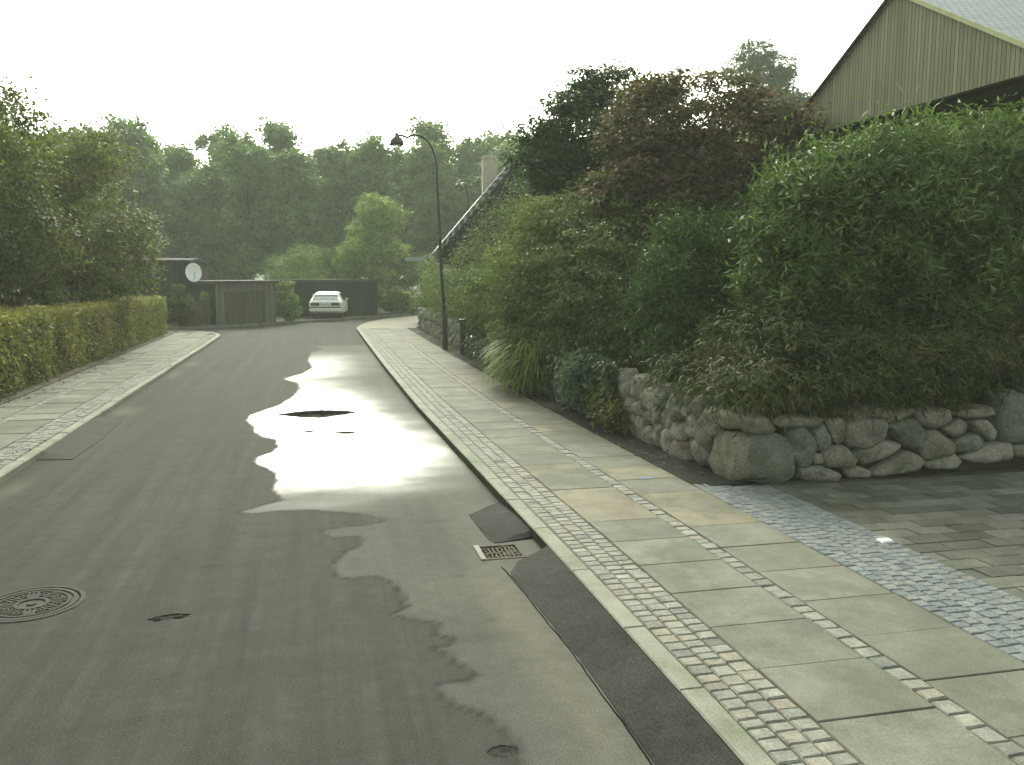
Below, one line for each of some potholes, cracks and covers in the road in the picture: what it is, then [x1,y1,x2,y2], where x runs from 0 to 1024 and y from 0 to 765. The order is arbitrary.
manhole cover [0,586,86,623]
drain grate [473,543,527,561]
pothole [486,745,519,759]
pothole [277,410,355,418]
pothole [147,613,190,622]
